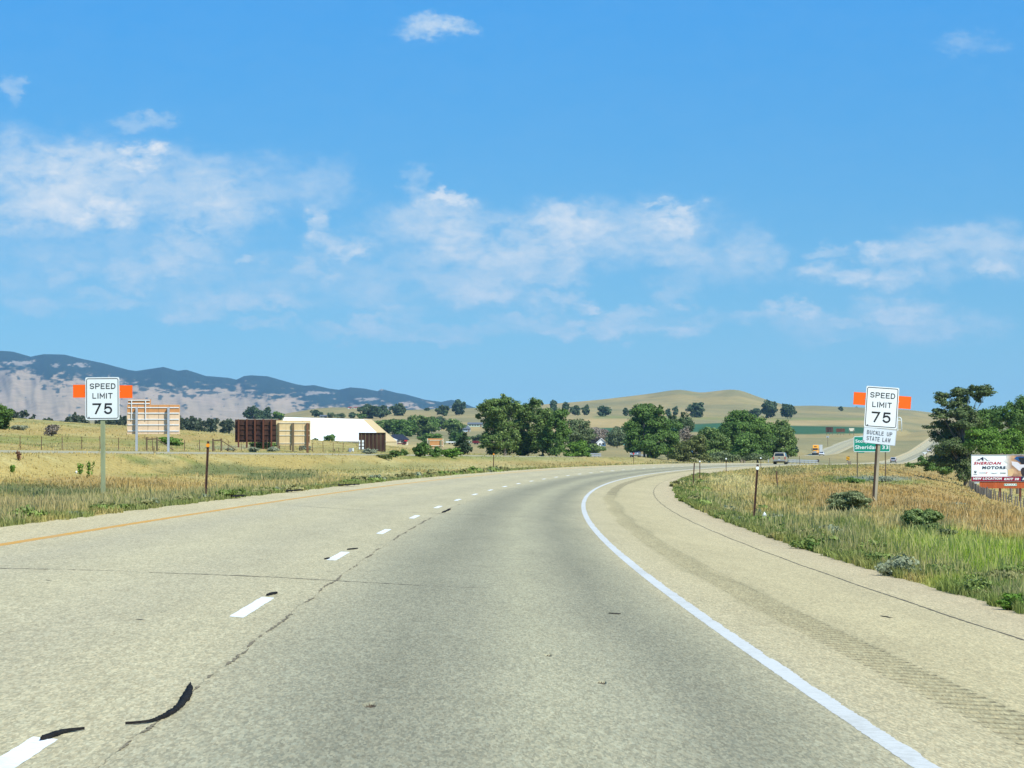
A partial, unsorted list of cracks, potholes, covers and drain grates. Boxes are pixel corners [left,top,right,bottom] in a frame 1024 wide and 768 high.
crack [17,559,476,588]
